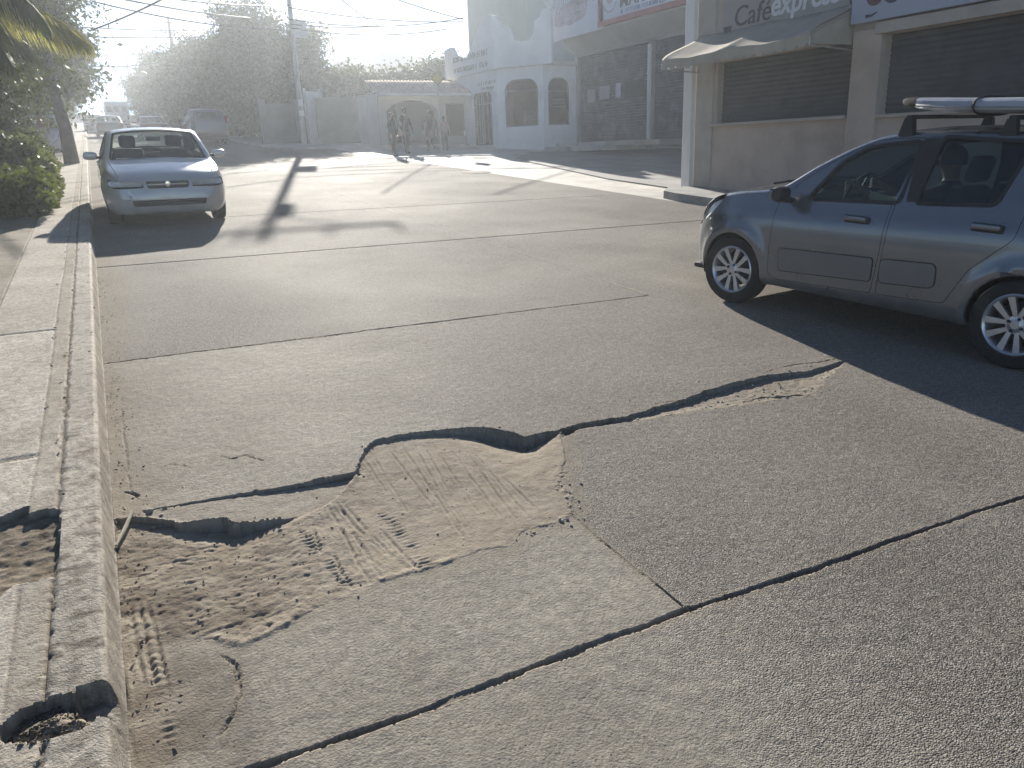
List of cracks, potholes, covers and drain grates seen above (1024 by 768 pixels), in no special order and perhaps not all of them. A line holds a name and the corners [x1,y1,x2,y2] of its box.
pothole [114,512,330,644]
crack [743,394,816,403]
crack [120,406,362,512]
crack [648,399,685,414]
crack [561,418,616,437]
crack [216,495,1024,768]
pothole [312,427,574,602]
crack [759,356,844,374]
